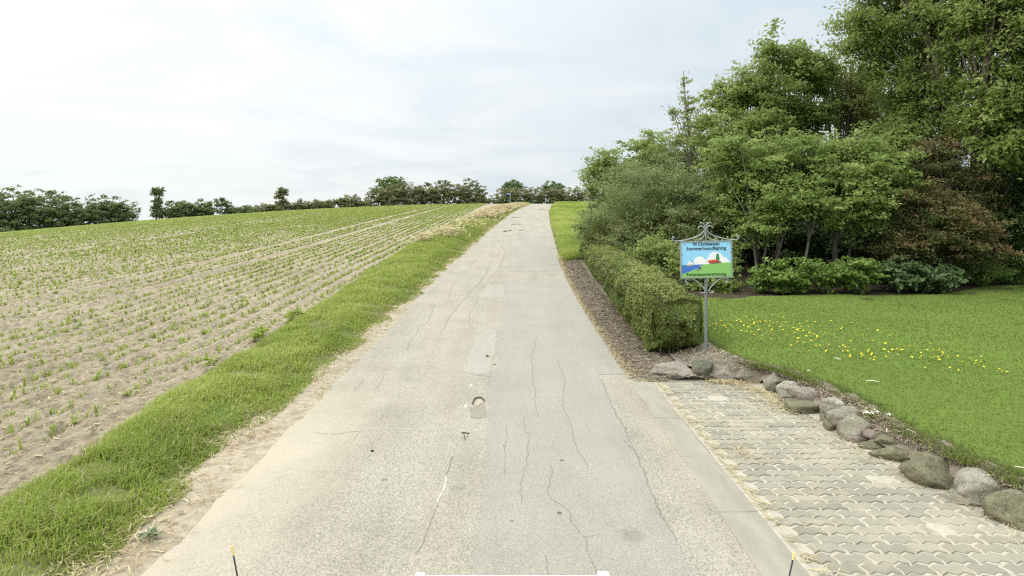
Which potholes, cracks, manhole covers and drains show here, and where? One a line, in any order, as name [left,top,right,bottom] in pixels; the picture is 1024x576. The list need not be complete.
crack [504,342,539,502]
crack [406,230,519,350]
crack [415,455,453,556]
